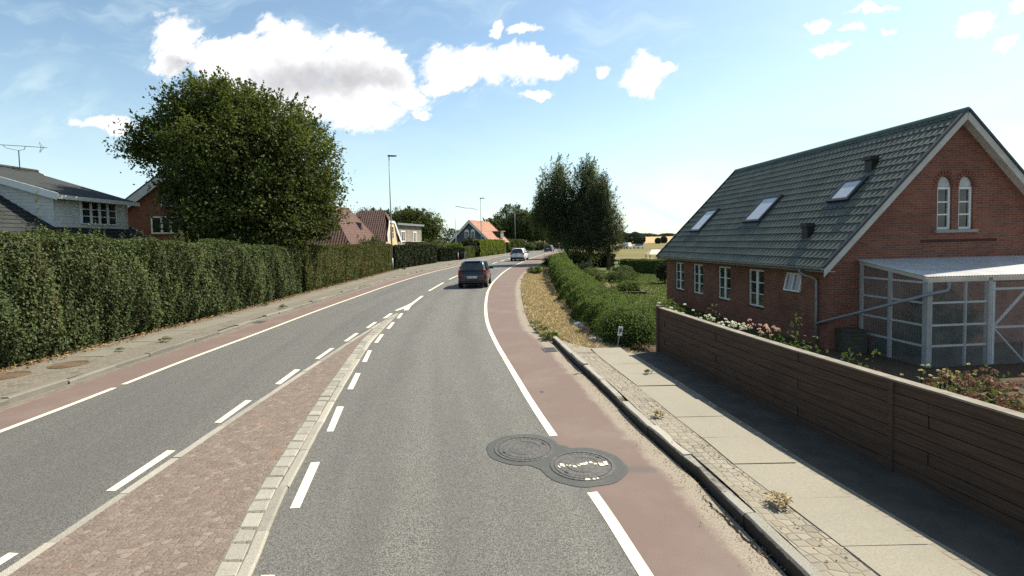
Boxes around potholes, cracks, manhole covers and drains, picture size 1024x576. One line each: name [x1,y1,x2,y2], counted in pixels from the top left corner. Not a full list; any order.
manhole cover [494,436,554,462]
manhole cover [47,360,91,369]
manhole cover [550,451,616,481]
manhole cover [0,371,32,380]
